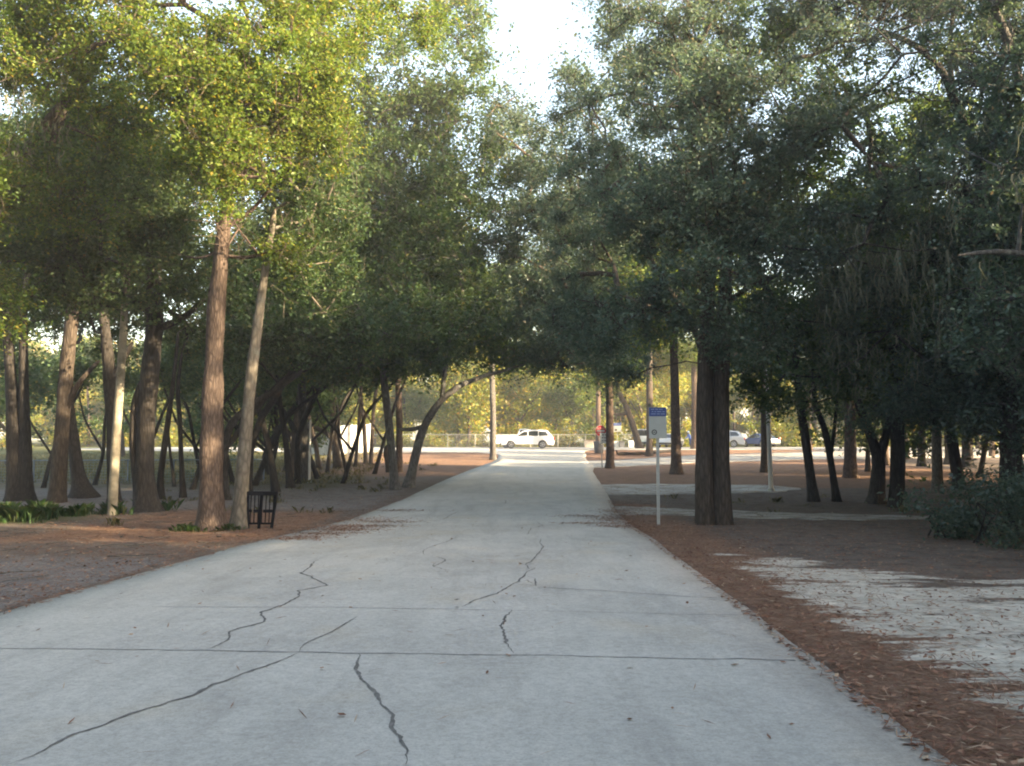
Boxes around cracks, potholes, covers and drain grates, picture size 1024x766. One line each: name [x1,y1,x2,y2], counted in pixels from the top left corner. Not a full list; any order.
crack [462,523,564,653]
crack [354,654,409,763]
crack [211,560,327,648]
crack [9,617,356,764]
